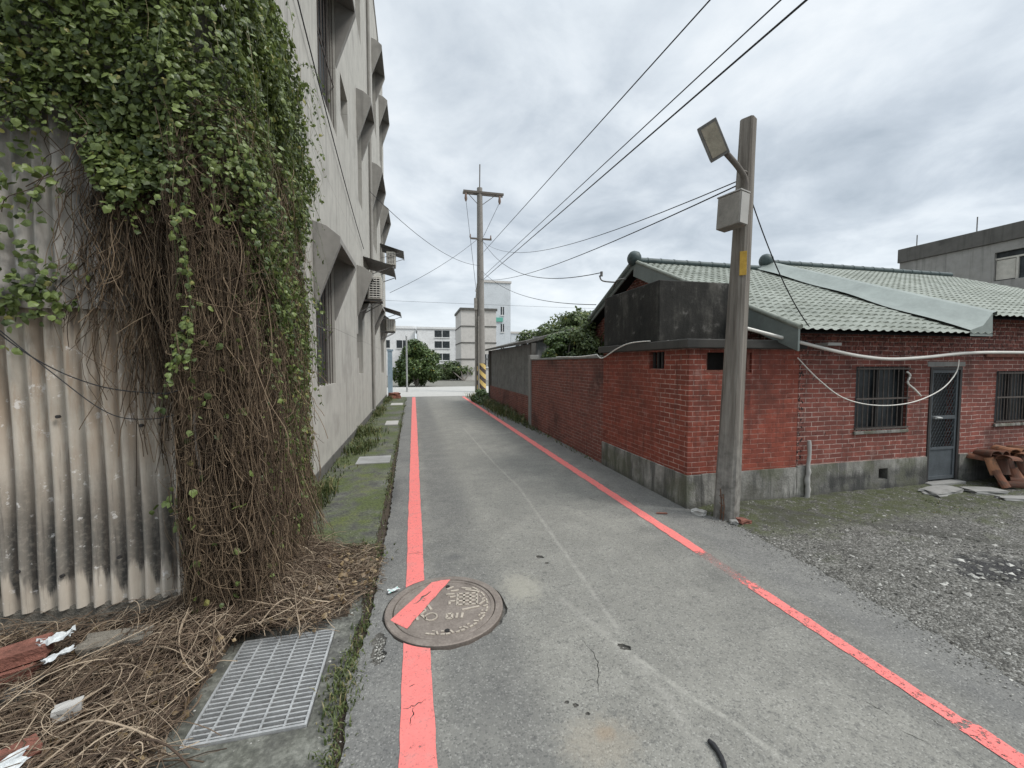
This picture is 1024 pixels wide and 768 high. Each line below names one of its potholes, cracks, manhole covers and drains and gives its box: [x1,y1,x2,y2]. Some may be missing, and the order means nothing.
manhole cover [382,576,507,650]
pothole [371,633,387,666]
drain grate [179,628,335,752]
